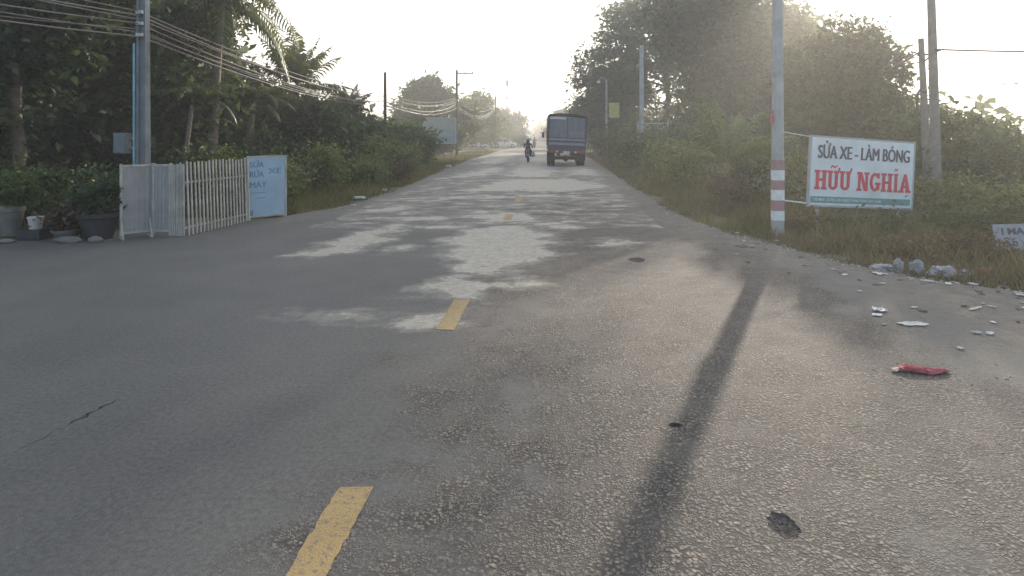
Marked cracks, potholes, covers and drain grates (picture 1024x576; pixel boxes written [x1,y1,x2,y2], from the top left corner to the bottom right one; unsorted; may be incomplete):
pothole [766,511,802,540]
crack [18,399,117,450]
